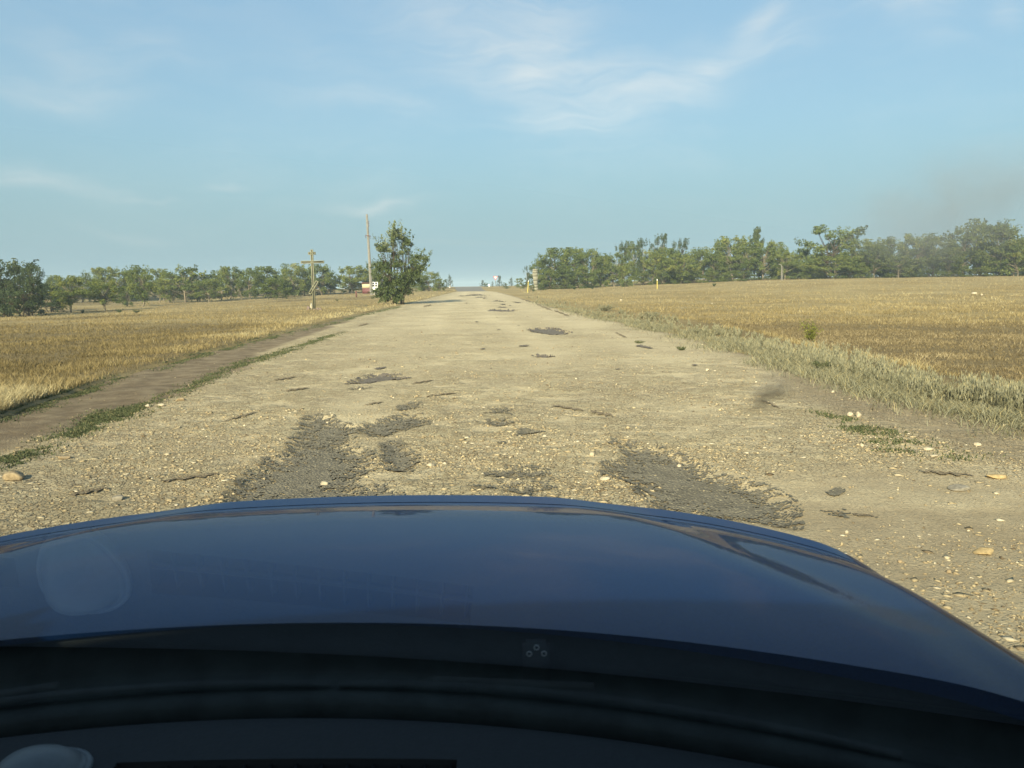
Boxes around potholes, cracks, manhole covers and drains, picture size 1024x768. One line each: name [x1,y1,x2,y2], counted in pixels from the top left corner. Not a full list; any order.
pothole [344,373,411,384]
pothole [218,413,381,503]
pothole [353,412,431,437]
pothole [377,439,420,472]
pothole [596,440,806,529]
pothole [528,327,572,335]
